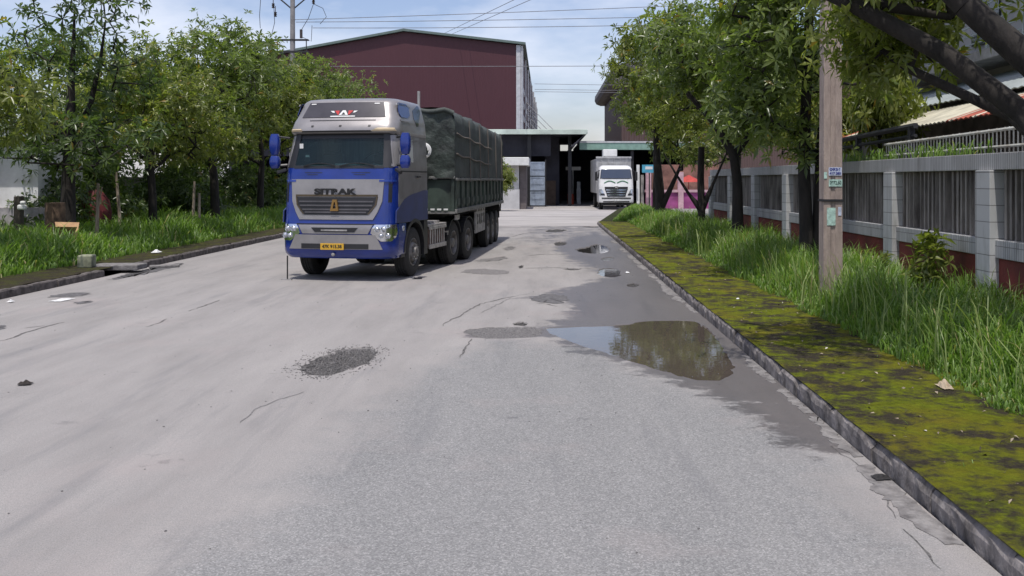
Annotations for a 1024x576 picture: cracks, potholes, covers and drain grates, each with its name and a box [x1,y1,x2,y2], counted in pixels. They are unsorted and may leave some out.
crack [833,447,941,569]
pothole [299,347,379,377]
crack [443,294,524,326]
